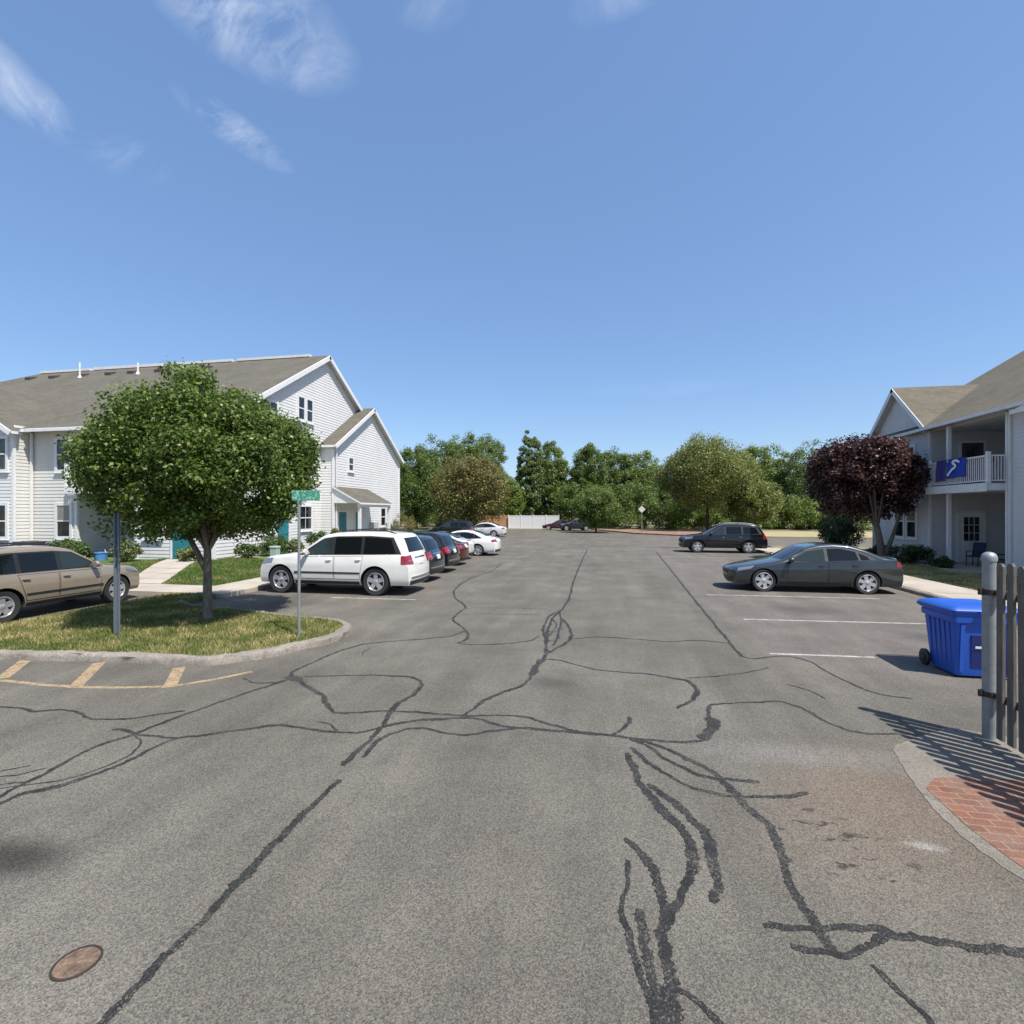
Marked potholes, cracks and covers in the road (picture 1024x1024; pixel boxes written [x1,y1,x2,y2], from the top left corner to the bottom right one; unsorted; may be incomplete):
manhole cover [49,944,103,982]
